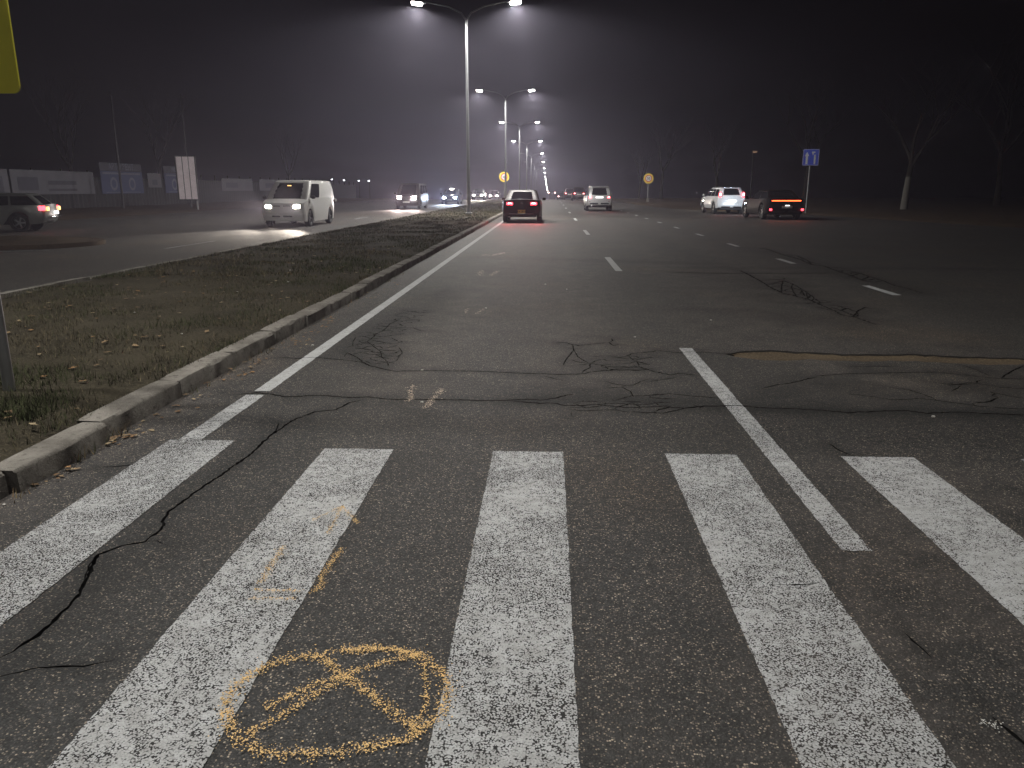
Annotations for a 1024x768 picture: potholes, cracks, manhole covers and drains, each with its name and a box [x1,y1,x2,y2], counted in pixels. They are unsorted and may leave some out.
crack [686,248,921,324]
crack [0,310,1024,677]
